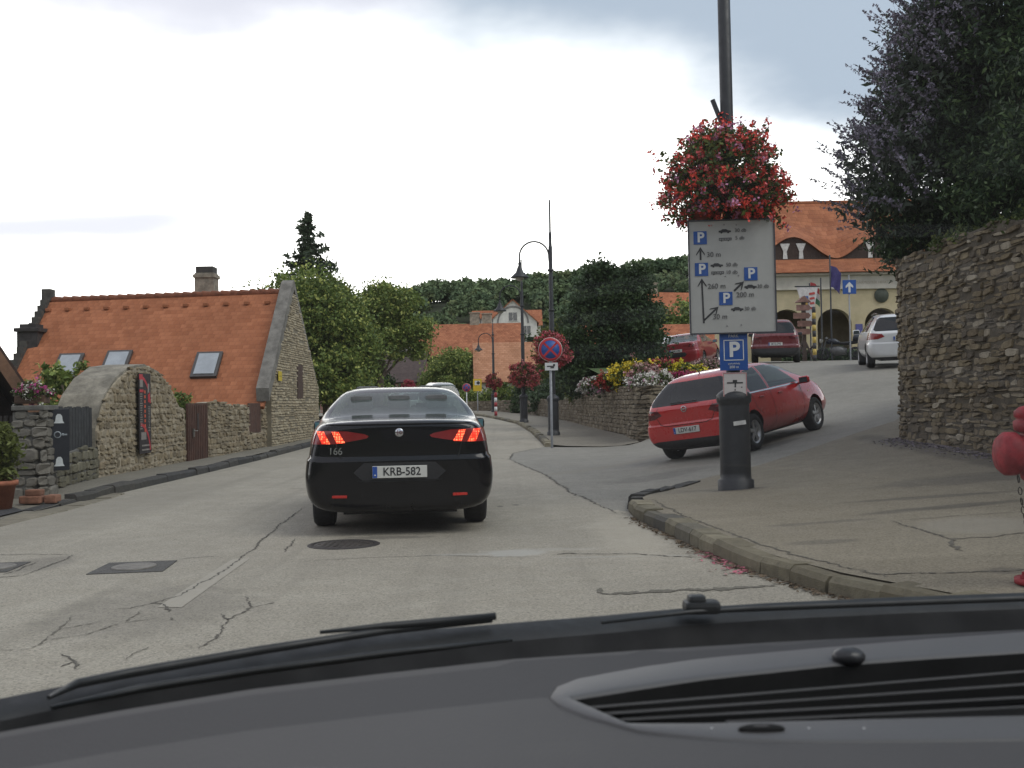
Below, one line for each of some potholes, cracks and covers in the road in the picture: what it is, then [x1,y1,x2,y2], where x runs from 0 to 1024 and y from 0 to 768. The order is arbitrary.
manhole cover [0,562,30,573]
manhole cover [86,560,177,575]
crack [9,506,305,668]
manhole cover [307,539,380,550]
